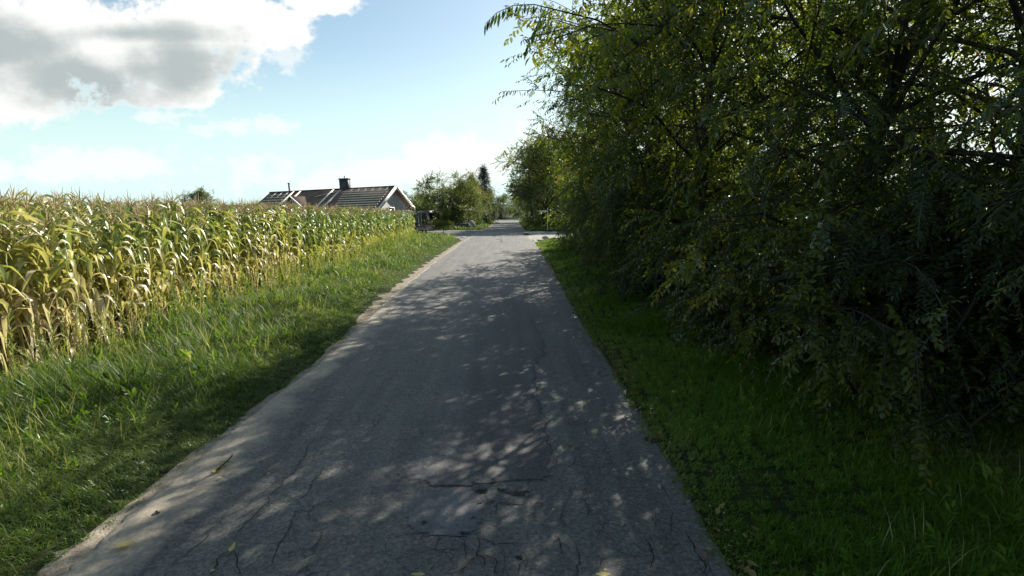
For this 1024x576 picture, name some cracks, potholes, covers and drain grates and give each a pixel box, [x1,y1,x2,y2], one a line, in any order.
crack [406,478,548,514]
crack [172,442,357,574]
crack [395,533,526,574]
crack [558,488,607,572]
crack [645,486,707,575]
